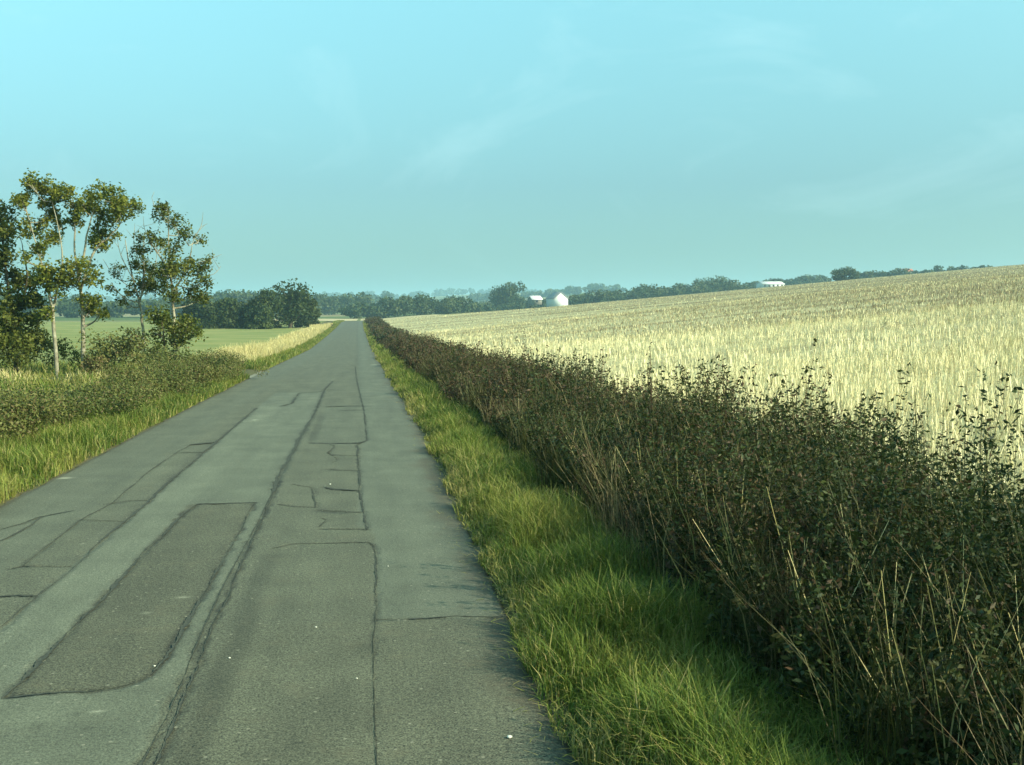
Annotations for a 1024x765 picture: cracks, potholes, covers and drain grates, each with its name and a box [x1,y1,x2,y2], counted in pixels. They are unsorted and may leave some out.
crack [2,367,369,765]
